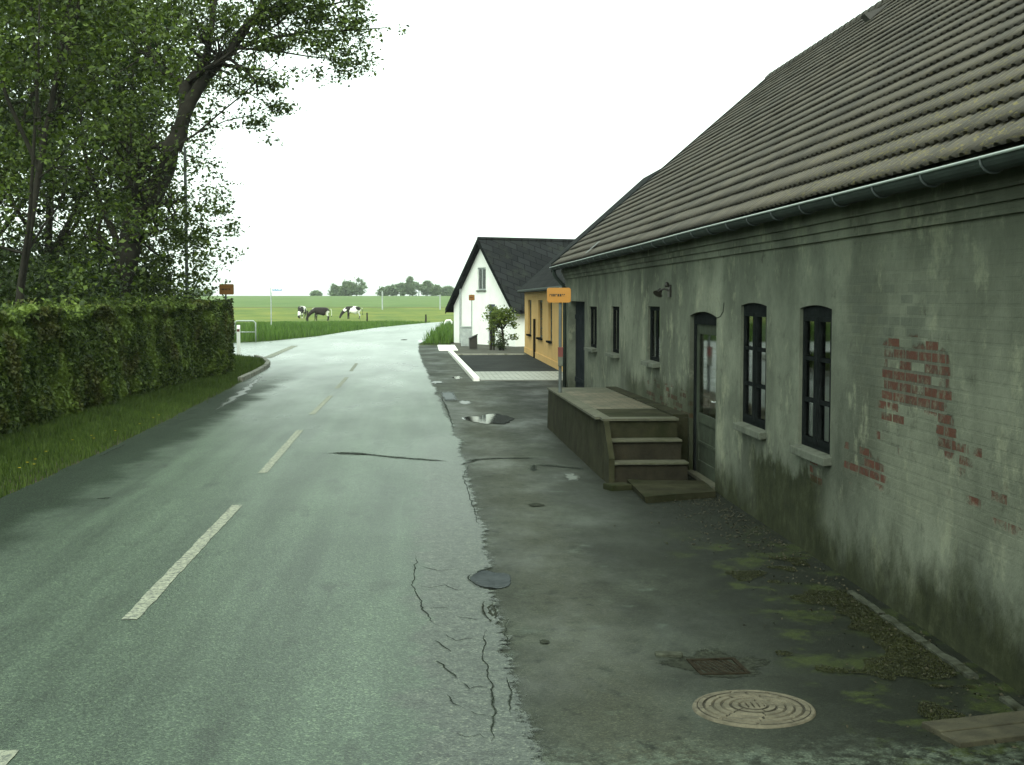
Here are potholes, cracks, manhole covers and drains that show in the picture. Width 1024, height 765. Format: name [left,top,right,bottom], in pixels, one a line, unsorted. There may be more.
manhole cover [692,690,816,729]
drain grate [686,657,750,675]
crack [411,560,512,737]
